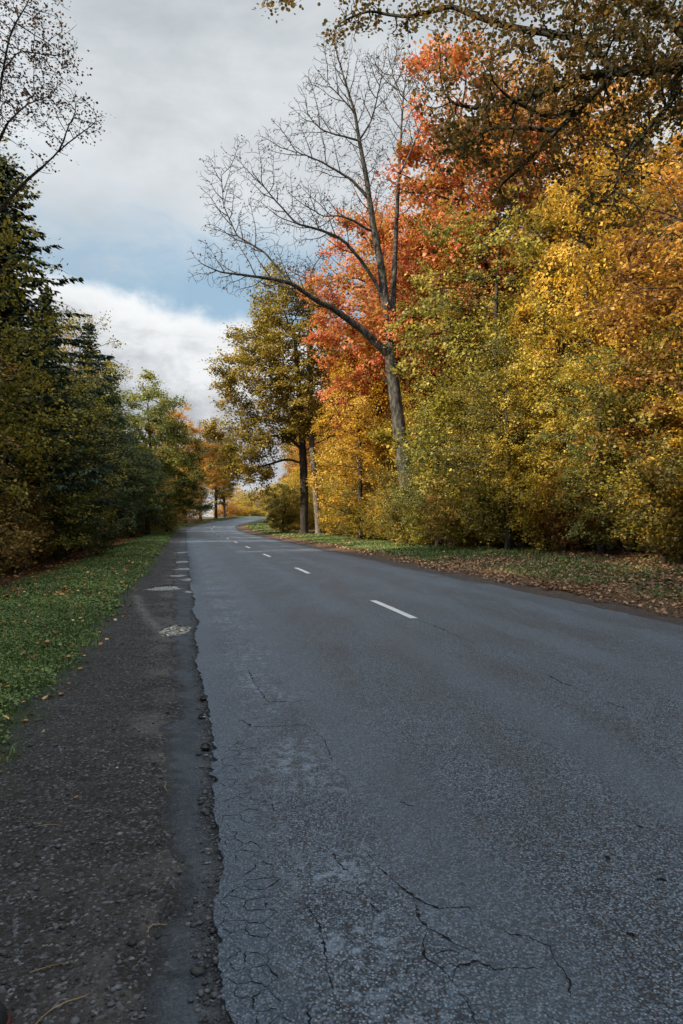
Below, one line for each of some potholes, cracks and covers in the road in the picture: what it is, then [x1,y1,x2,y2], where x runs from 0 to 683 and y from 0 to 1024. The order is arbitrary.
crack [307,906,334,989]
crack [240,720,333,761]
crack [331,851,572,1024]
crack [219,741,312,1024]
